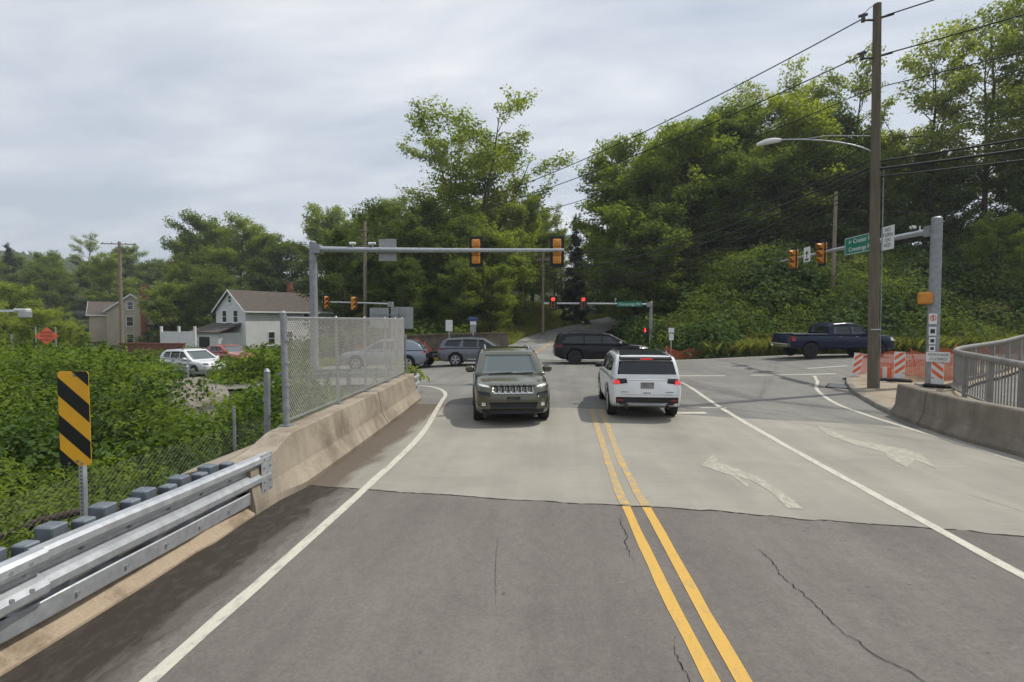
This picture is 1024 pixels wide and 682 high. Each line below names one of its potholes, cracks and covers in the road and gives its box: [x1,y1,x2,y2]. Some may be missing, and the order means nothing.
crack [758,549,925,682]
